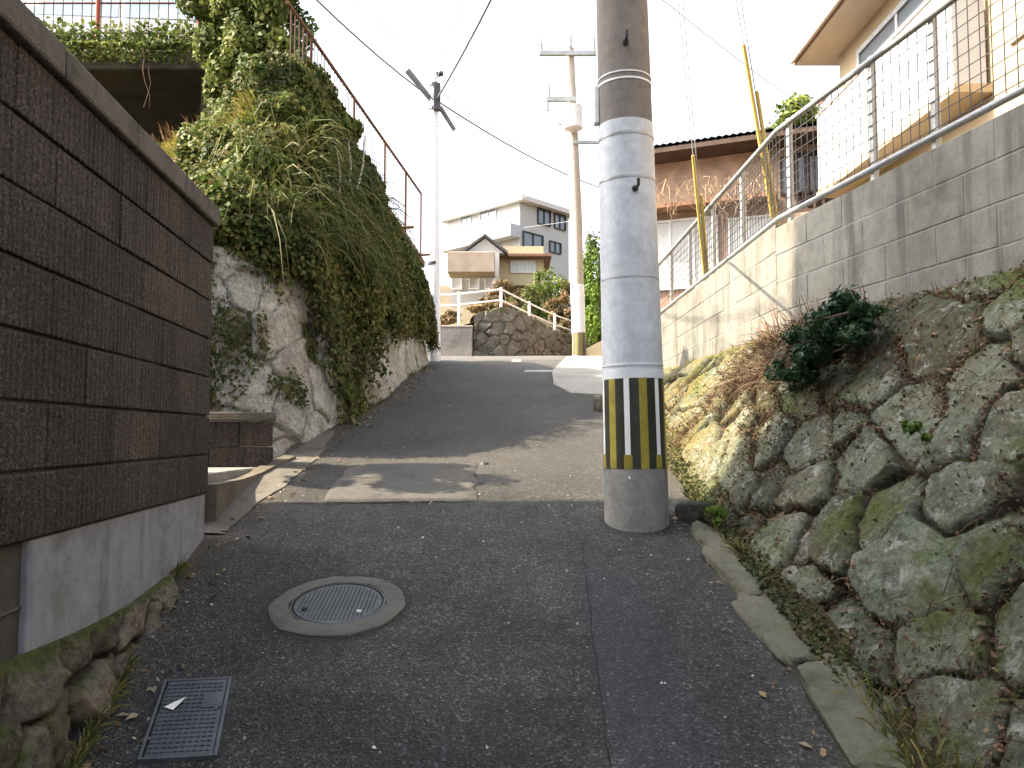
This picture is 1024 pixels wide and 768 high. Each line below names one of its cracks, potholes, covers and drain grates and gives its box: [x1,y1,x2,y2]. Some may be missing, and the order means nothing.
manhole cover [268,576,406,637]
